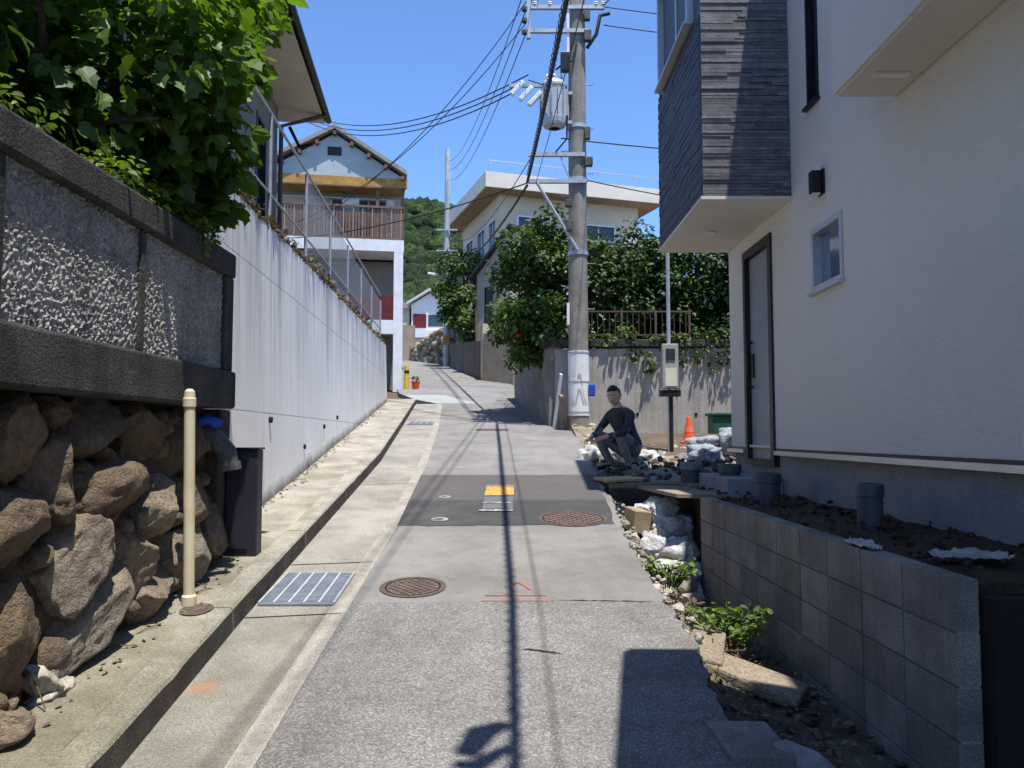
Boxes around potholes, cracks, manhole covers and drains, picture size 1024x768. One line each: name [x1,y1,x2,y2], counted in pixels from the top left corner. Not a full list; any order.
drain grate [257,572,355,606]
utility cover [479,497,513,511]
manhole cover [379,577,446,597]
manhole cover [538,511,608,526]
